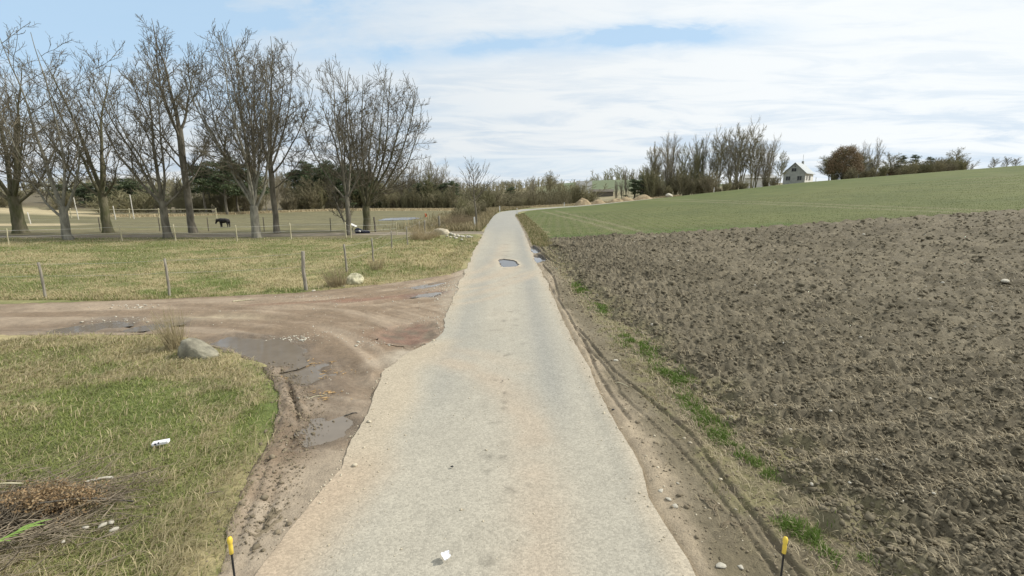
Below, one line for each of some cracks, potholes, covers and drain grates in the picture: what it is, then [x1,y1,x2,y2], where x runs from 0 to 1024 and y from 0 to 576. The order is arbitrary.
pothole [498,259,520,267]
